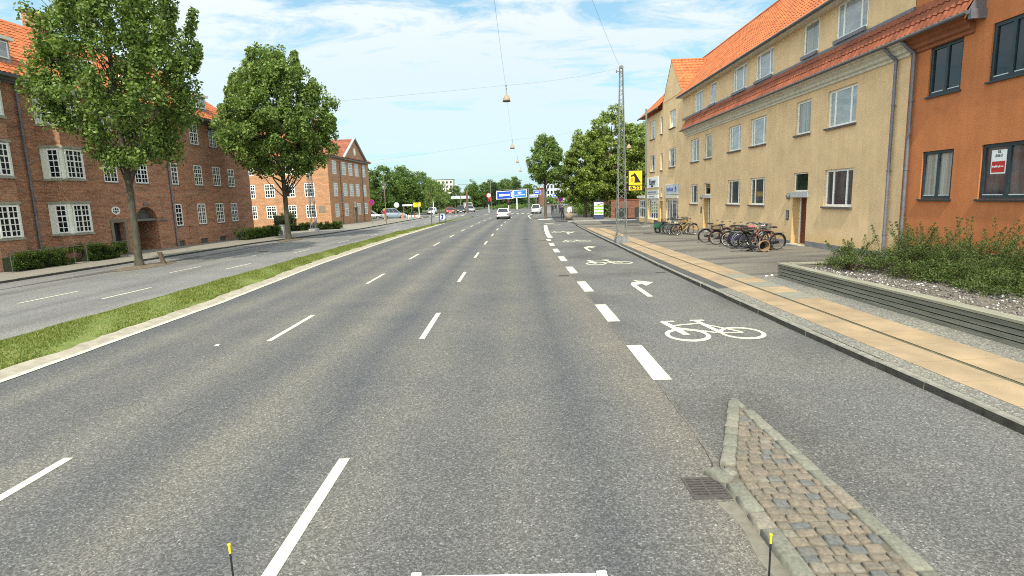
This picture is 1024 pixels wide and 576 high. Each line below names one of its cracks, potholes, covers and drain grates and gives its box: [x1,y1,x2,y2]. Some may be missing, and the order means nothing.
drain grate [681,477,733,500]
